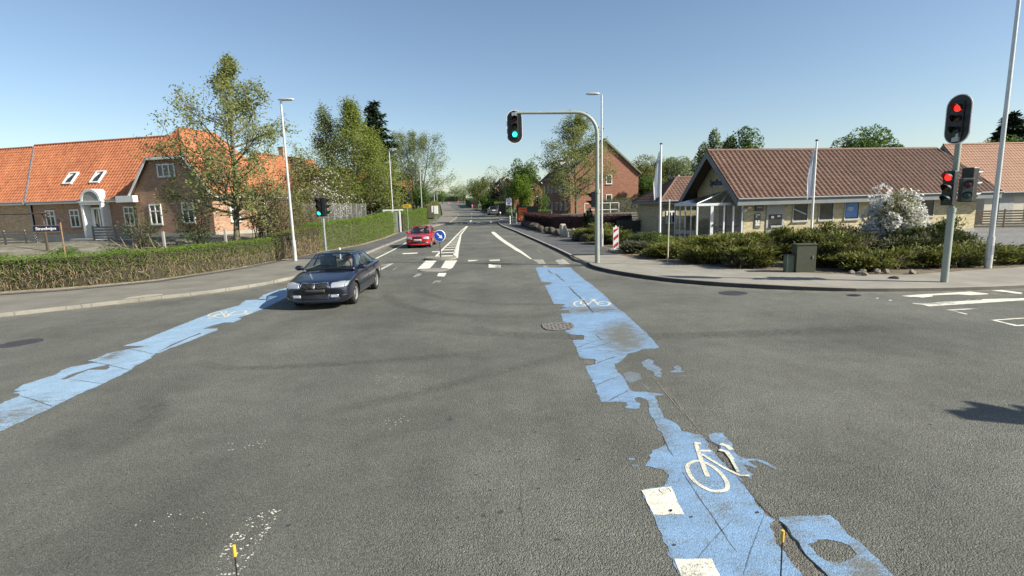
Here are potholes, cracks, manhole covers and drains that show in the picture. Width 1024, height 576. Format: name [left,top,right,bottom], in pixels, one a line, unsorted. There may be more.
crack [577,335,627,401]
crack [548,270,615,313]
crack [684,474,769,575]
